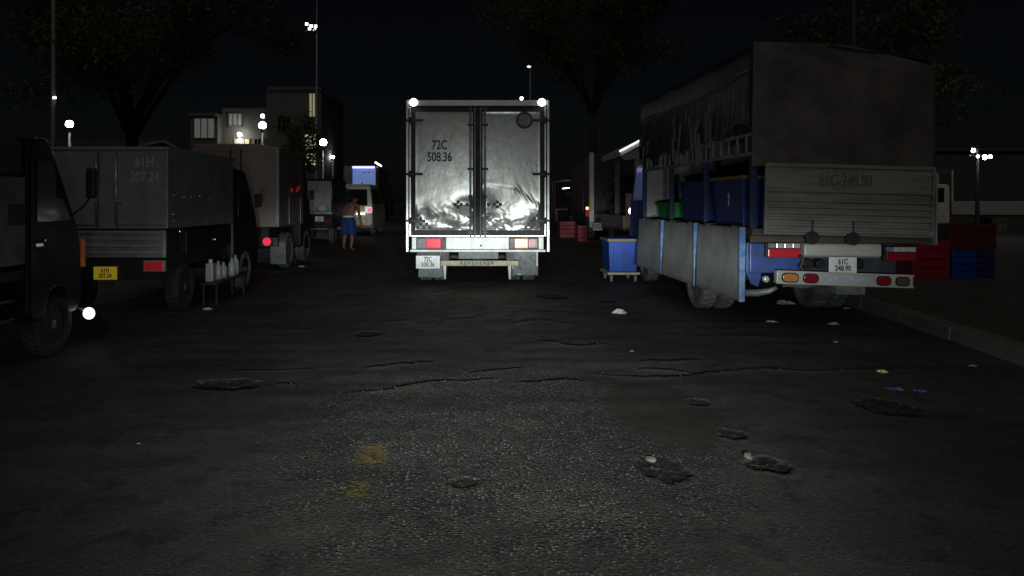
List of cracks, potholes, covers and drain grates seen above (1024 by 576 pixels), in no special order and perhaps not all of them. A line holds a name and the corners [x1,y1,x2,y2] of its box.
crack [214,311,965,396]
pothole [679,396,720,408]
pothole [840,395,937,420]
pothole [621,451,706,490]
pothole [707,425,759,444]
pothole [347,330,388,338]
pothole [731,452,807,479]
pothole [531,292,576,300]
pothole [183,376,275,393]
pothole [435,472,491,494]
